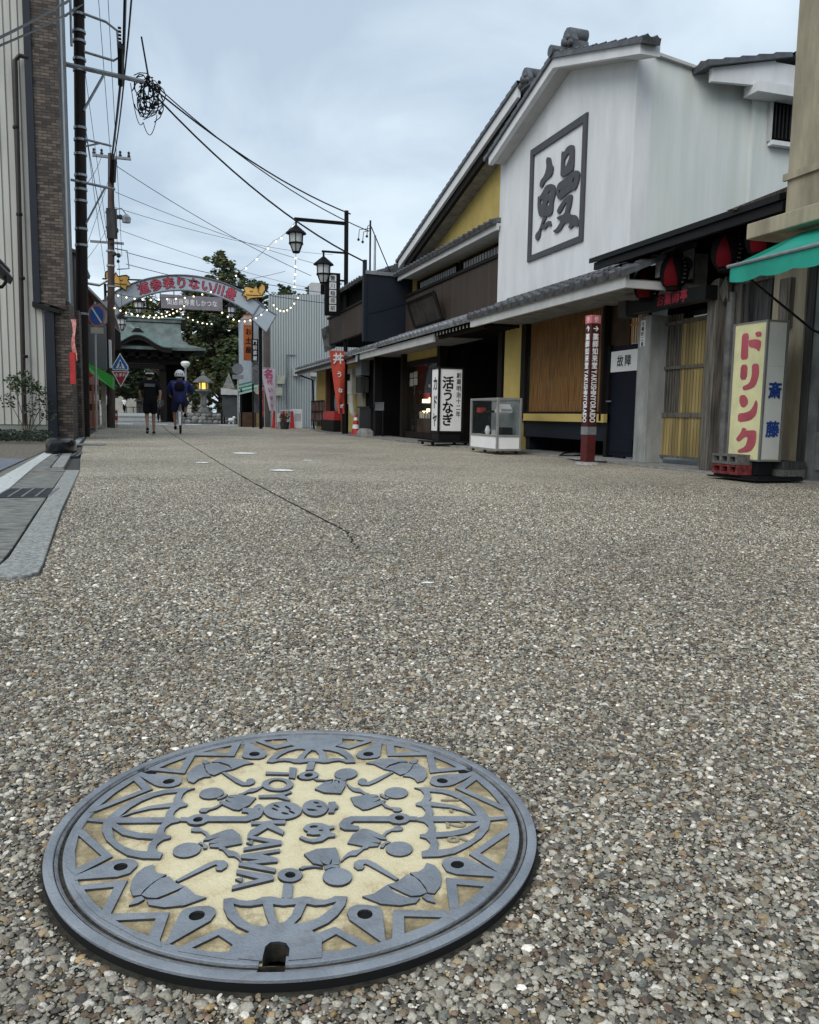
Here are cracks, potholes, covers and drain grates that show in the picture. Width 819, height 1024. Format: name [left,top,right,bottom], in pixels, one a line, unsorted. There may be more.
drain grate [0,488,59,499]
manhole cover [38,730,541,998]
crack [166,429,369,549]
